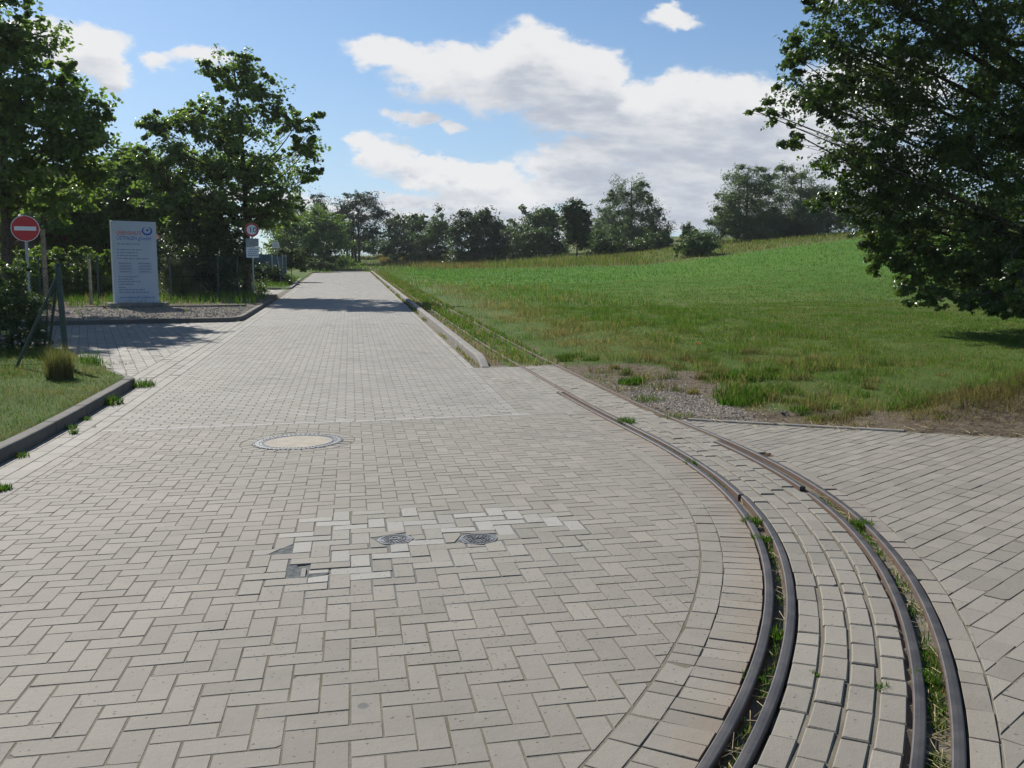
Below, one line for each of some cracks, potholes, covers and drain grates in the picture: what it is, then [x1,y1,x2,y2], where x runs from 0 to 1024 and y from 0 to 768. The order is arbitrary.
utility cover [459,533,497,545]
utility cover [377,534,413,545]
manhole cover [253,433,343,450]
